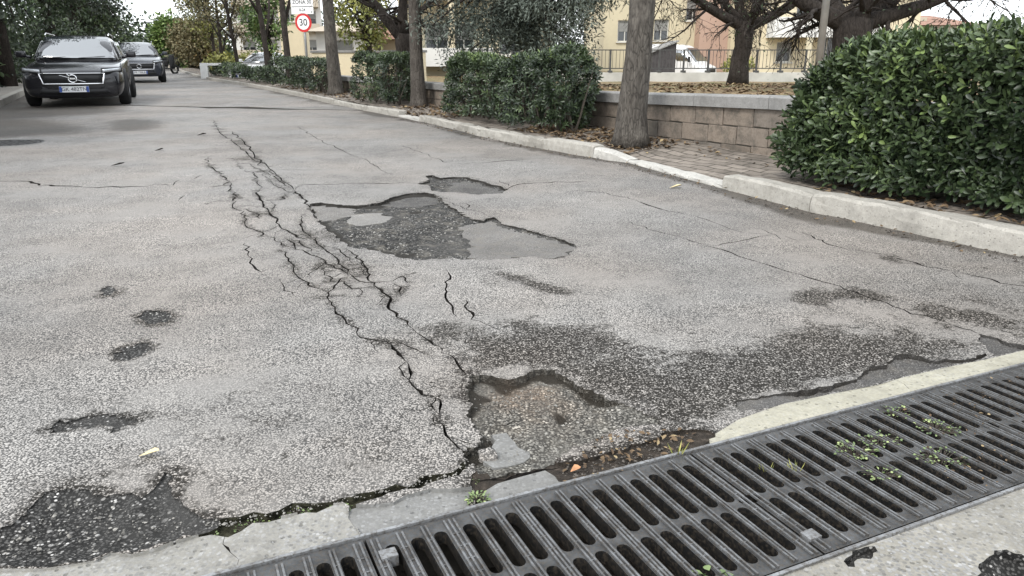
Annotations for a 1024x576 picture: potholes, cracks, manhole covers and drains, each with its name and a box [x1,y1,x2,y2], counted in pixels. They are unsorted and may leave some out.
pothole [136,310,174,324]
drain grate [921,366,1024,439]
pothole [462,369,661,481]
drain grate [365,454,823,576]
drain grate [226,540,378,576]
pothole [47,413,138,434]
crack [26,176,199,201]
crack [499,180,976,333]
crack [198,122,560,565]
pothole [0,472,219,567]
drain grate [691,393,1024,555]
crack [788,232,1022,286]
